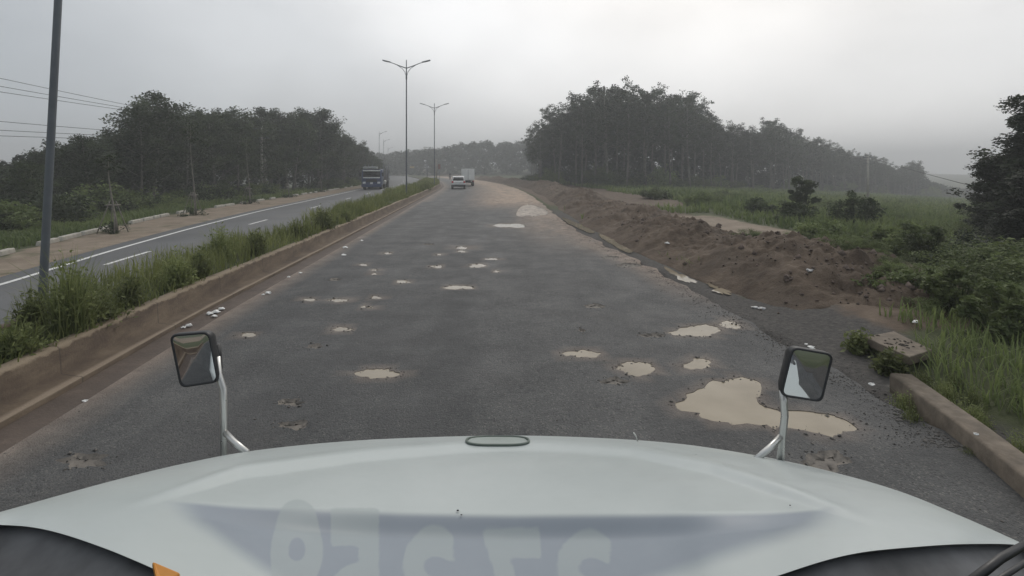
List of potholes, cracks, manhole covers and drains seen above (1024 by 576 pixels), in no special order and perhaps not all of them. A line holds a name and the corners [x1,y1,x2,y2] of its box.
pothole [664,324,721,338]
pothole [668,375,863,440]
pothole [559,348,601,359]
pothole [788,442,852,474]
pothole [718,319,743,329]
pothole [273,396,305,408]
pothole [55,449,119,471]
pothole [271,419,319,431]
pothole [353,367,405,379]
pothole [612,360,657,377]
pothole [675,356,713,371]
pothole [516,204,548,217]
